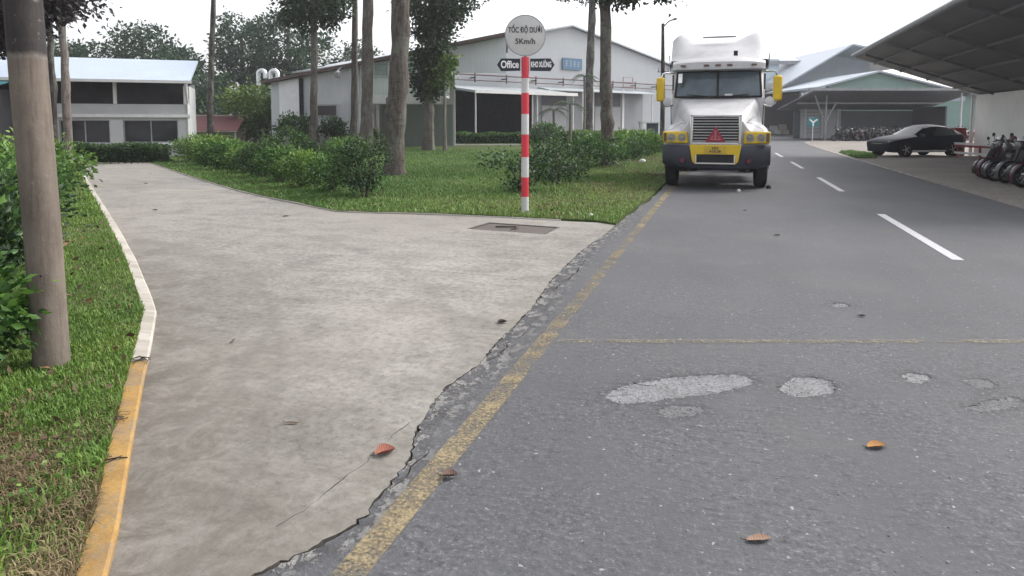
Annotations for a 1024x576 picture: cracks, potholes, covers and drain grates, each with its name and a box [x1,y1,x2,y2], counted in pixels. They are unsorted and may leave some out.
crack [251,423,429,576]
manhole cover [467,222,559,234]
crack [438,241,596,397]
